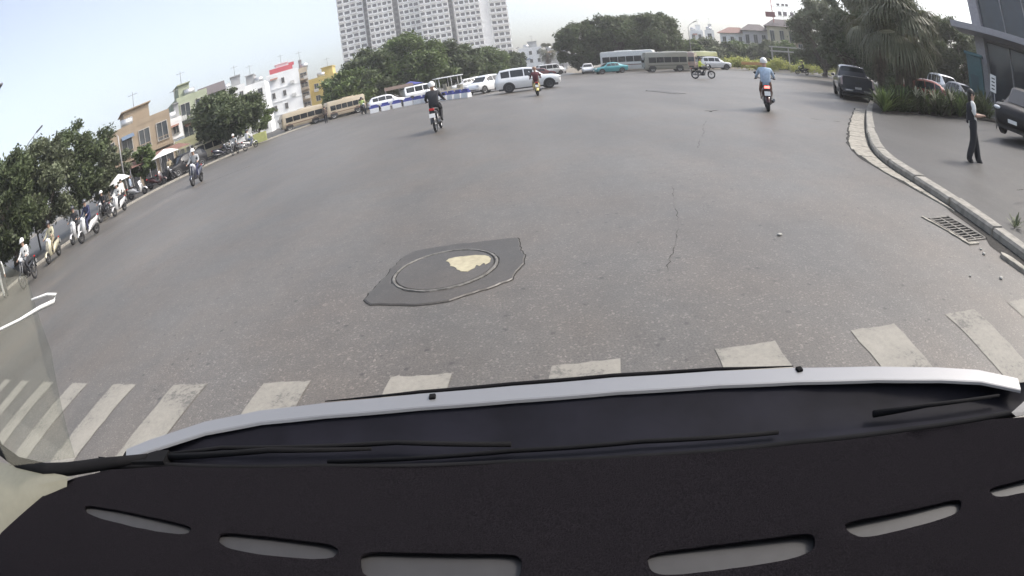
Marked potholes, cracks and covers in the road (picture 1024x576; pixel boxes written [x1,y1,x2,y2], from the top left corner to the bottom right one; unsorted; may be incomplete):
manhole cover [363,238,526,306]
drain grate [928,216,987,242]
